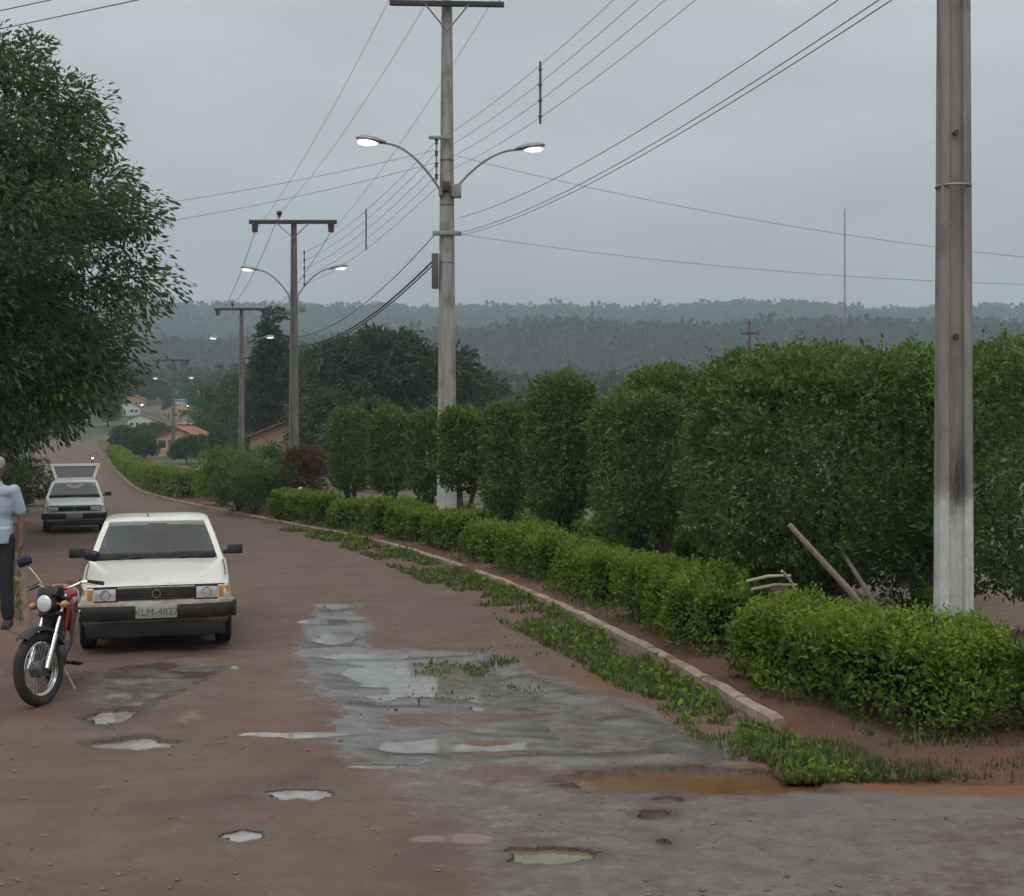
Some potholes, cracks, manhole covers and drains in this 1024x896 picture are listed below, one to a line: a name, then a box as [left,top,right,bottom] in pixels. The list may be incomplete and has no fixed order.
pothole [82,708,141,724]
pothole [83,735,188,751]
pothole [504,845,603,865]
pothole [636,810,672,820]
pothole [218,829,265,842]
pothole [264,788,335,800]
pothole [545,765,830,795]
